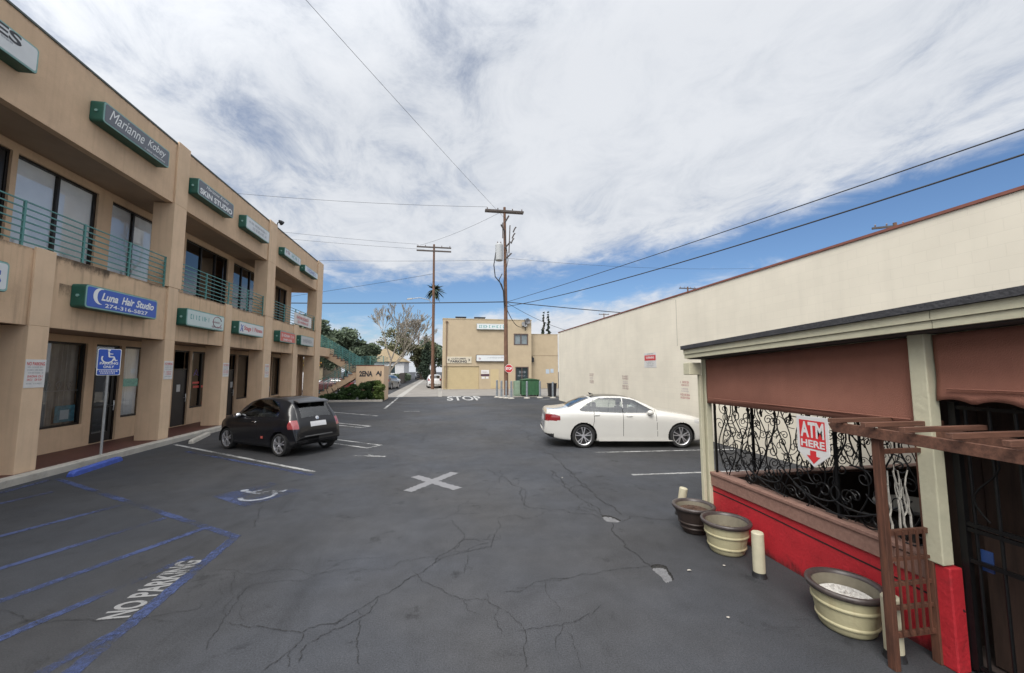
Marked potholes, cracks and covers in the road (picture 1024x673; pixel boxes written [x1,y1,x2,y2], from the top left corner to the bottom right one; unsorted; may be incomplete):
crack [413,571,601,669]
pothole [651,564,674,583]
crack [11,498,545,671]
crack [476,408,664,606]
